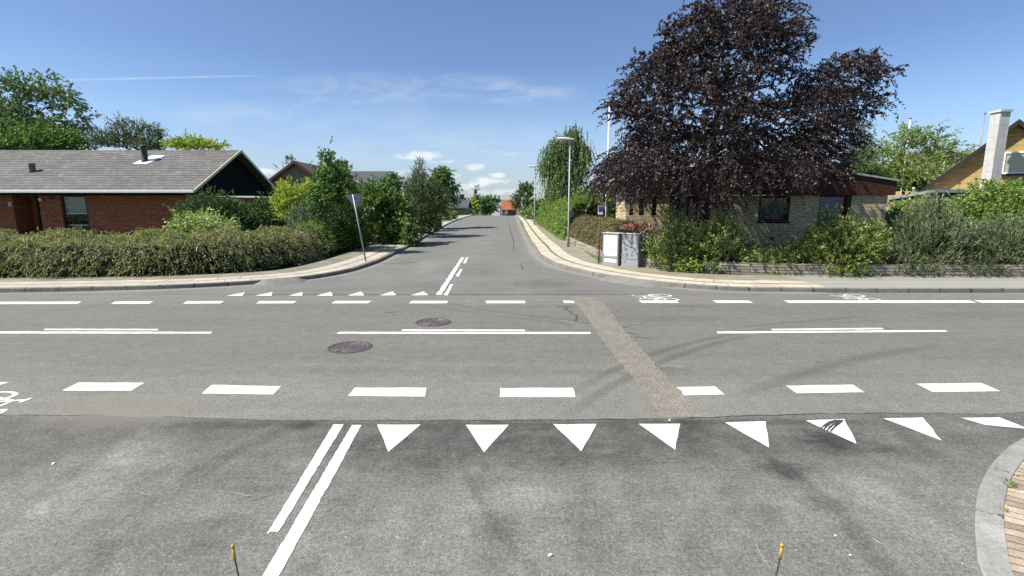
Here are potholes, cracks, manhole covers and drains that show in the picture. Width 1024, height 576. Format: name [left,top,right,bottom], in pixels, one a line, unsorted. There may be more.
manhole cover [327,341,372,354]
manhole cover [415,318,451,327]
